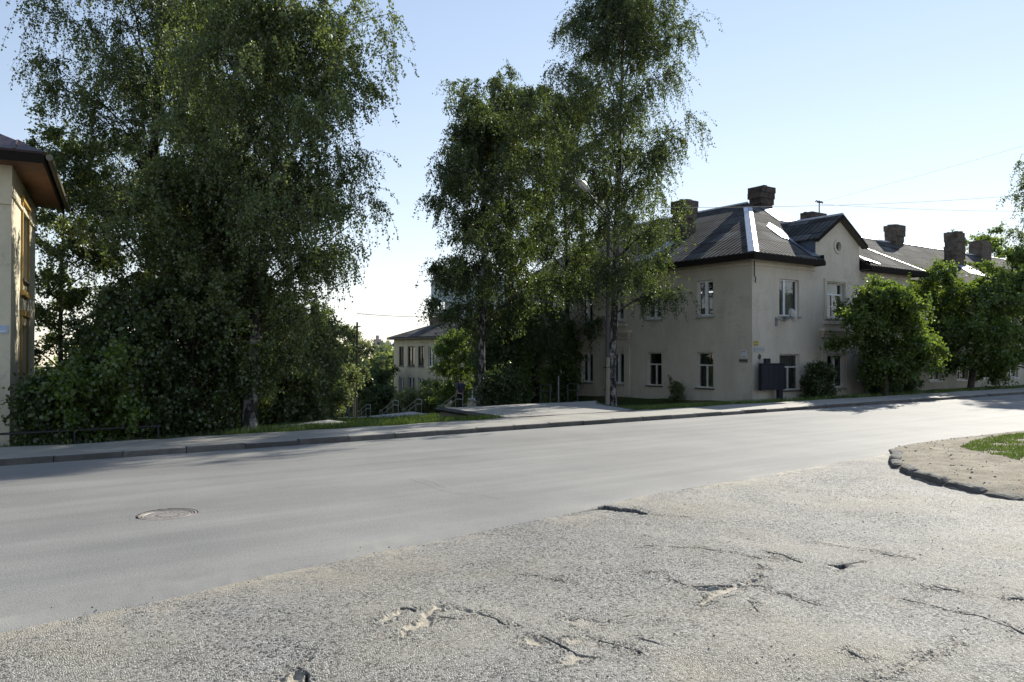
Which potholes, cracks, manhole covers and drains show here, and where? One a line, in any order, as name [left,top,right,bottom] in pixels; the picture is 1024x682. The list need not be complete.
crack [825,580,1024,672]
crack [410,478,513,499]
manhole cover [128,507,206,522]
crack [630,533,929,572]
pothole [352,597,536,647]
